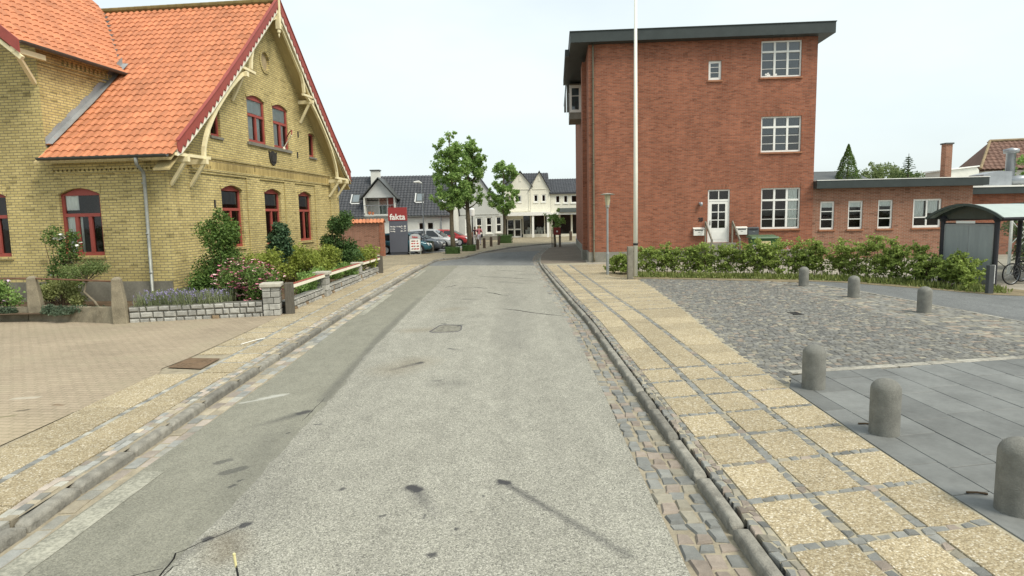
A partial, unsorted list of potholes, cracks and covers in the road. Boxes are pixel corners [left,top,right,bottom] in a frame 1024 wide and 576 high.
manhole cover [429,324,462,333]
manhole cover [169,358,220,369]
crack [133,525,241,576]
